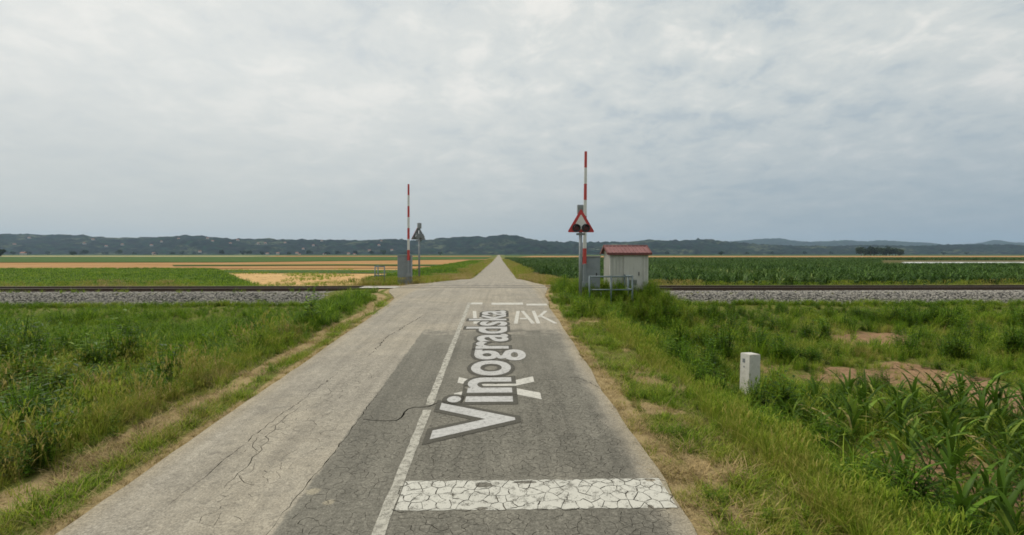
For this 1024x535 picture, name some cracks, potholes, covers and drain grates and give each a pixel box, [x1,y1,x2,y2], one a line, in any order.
crack [168,359,372,522]
